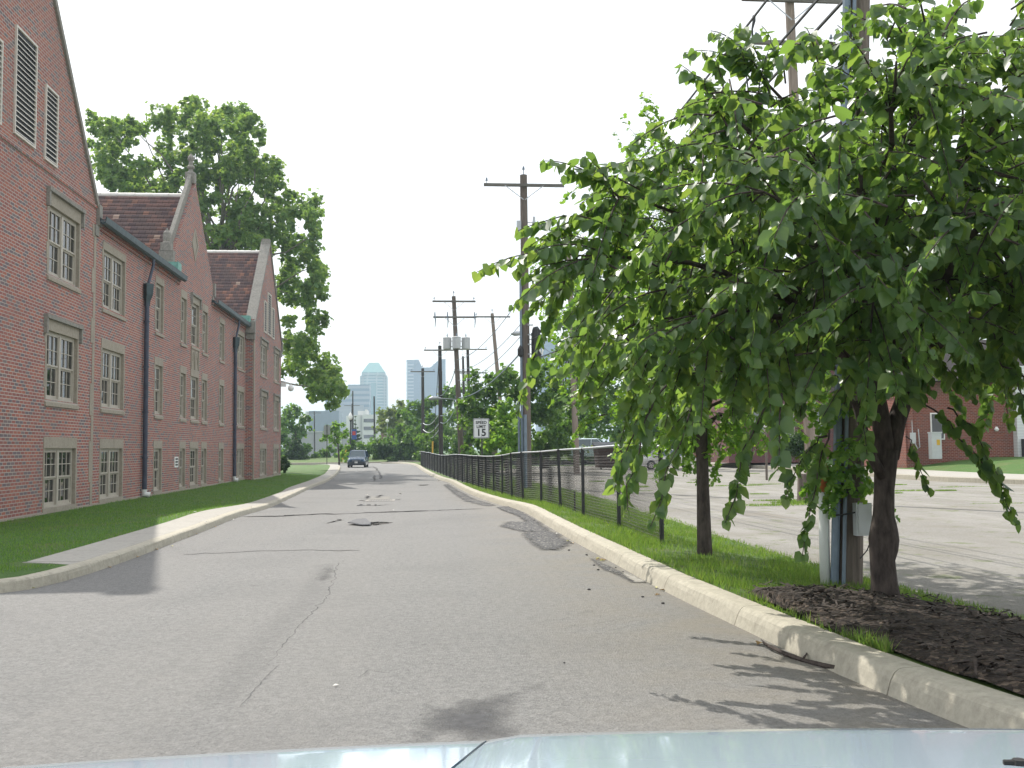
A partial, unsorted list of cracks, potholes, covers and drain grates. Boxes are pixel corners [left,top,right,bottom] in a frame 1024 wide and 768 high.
crack [248,467,494,524]
